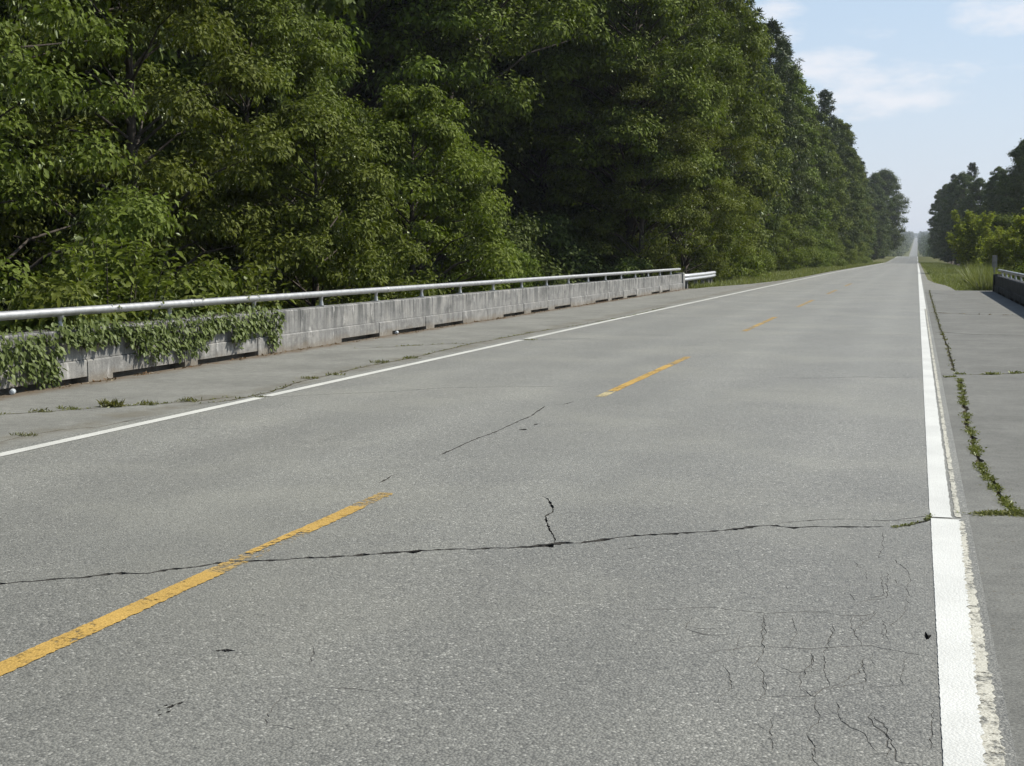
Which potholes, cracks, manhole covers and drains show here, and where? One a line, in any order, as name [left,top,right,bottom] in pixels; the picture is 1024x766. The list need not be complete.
crack [0,498,931,585]
crack [647,532,934,766]
crack [374,401,574,485]
